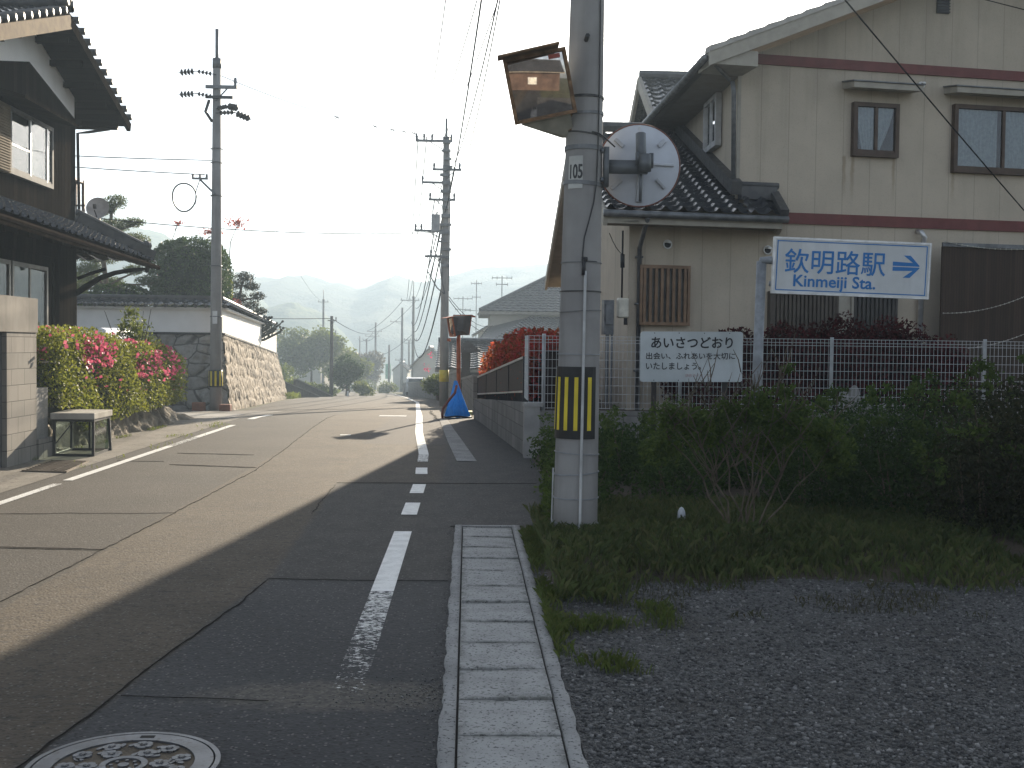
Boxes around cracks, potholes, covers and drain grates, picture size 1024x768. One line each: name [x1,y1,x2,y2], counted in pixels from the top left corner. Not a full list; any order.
manhole cover [24,732,221,768]
